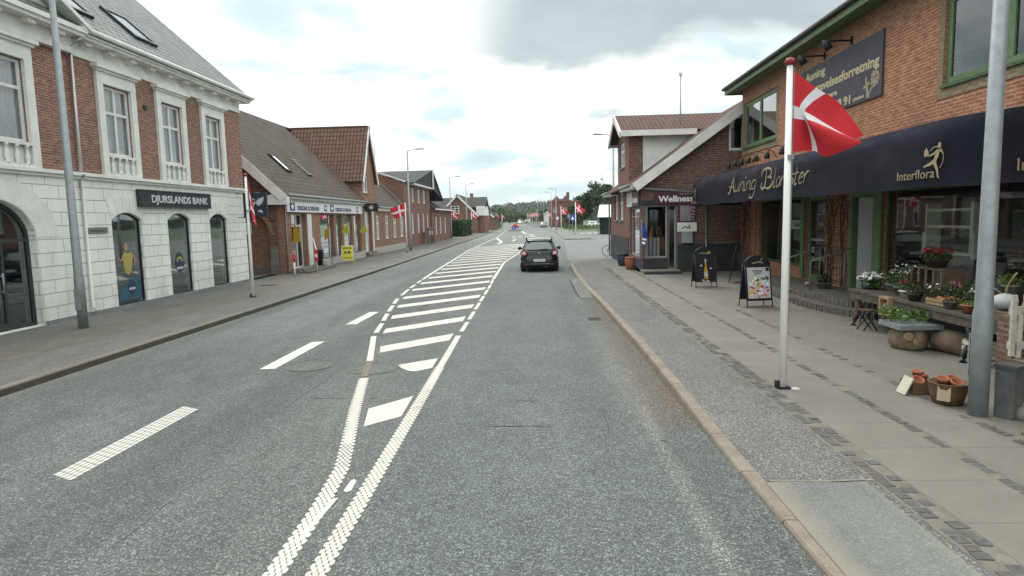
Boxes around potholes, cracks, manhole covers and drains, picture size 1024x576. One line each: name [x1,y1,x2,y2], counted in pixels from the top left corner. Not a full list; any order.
manhole cover [285,361,333,371]
manhole cover [350,363,400,374]
